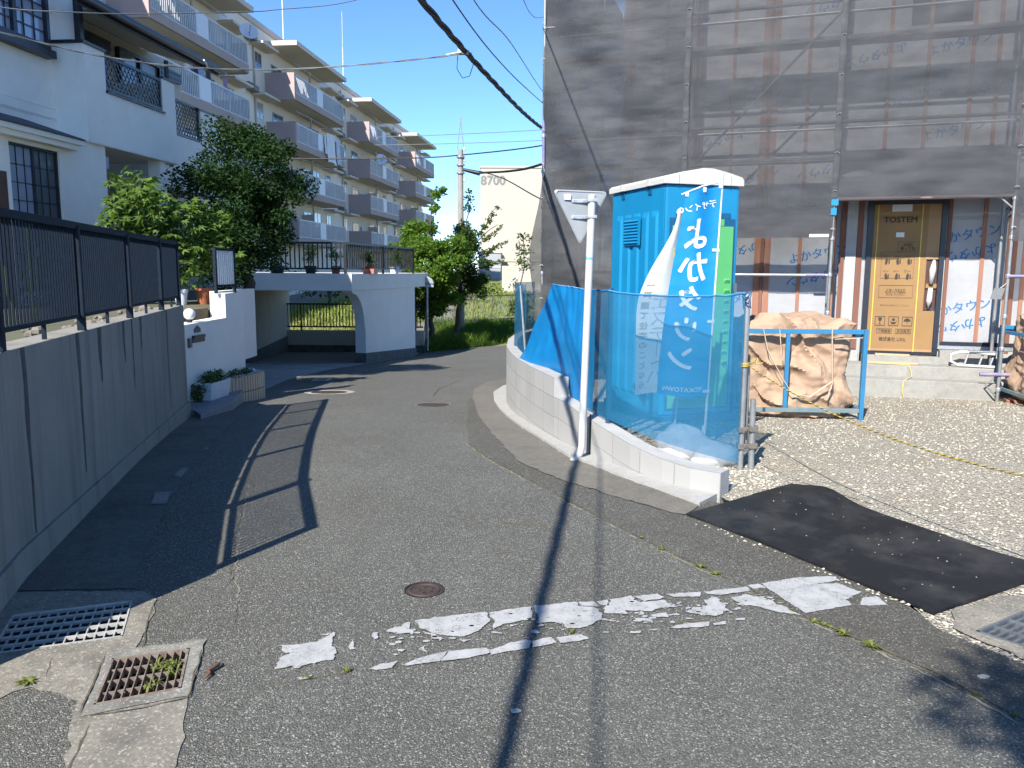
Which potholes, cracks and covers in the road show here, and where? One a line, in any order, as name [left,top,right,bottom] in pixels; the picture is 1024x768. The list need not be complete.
drain grate [976,610,1024,647]
drain grate [0,600,132,653]
drain grate [93,648,189,706]
manhole cover [404,582,445,598]
